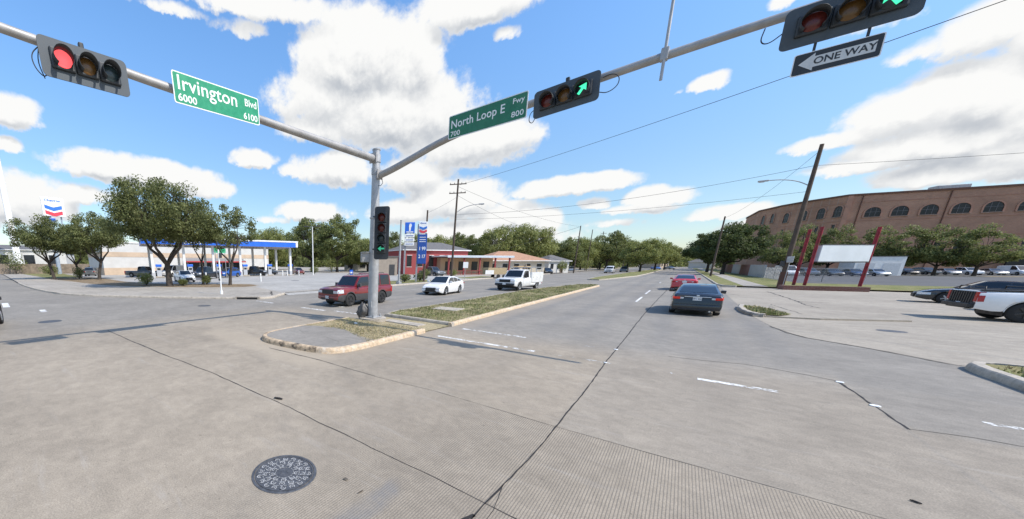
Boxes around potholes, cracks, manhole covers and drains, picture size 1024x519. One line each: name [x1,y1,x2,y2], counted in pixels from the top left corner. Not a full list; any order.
manhole cover [251,455,317,494]
